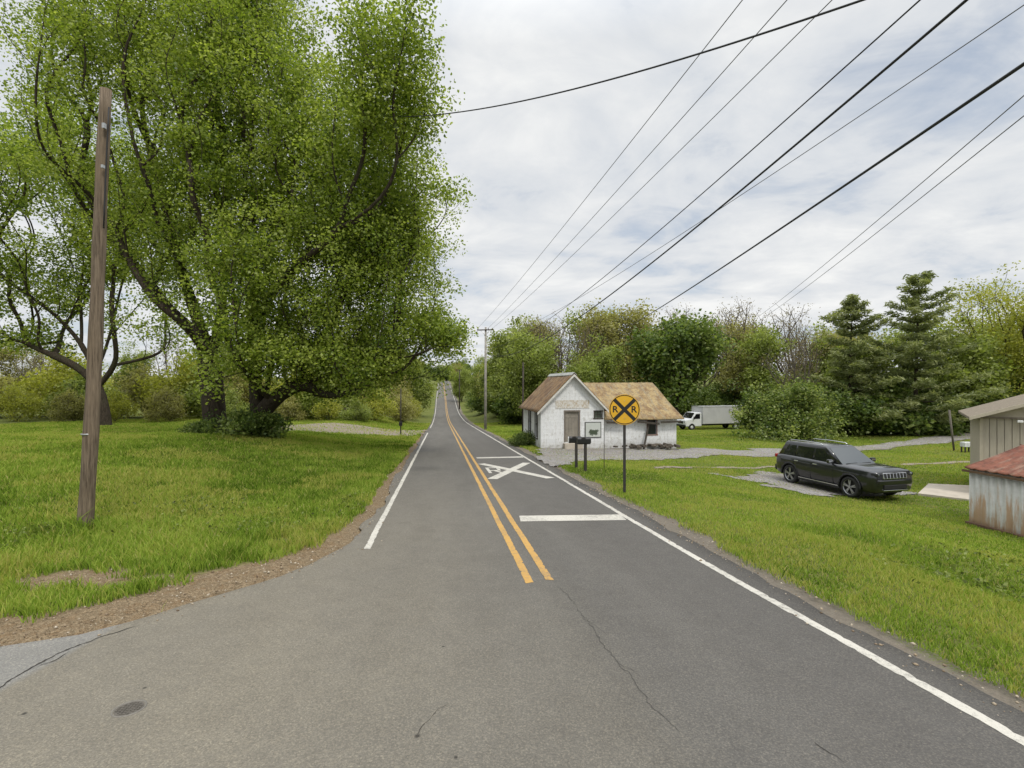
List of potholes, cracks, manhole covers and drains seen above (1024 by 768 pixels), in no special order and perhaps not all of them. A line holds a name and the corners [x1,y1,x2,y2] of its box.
crack [561,589,679,731]
manhole cover [110,699,148,718]
